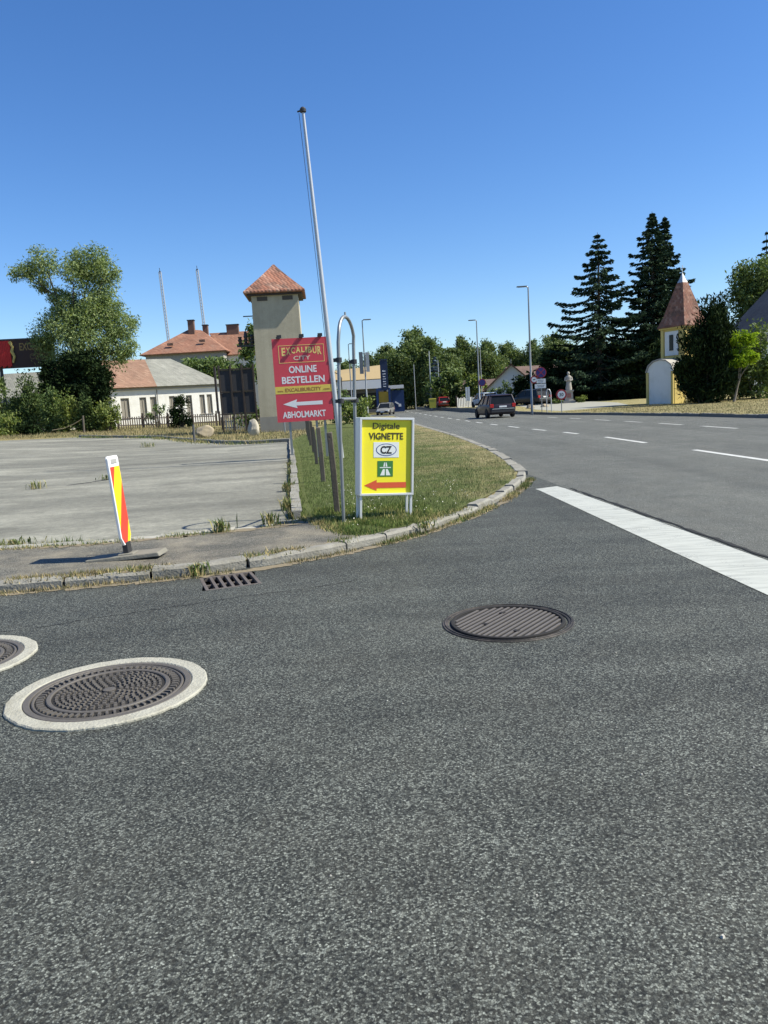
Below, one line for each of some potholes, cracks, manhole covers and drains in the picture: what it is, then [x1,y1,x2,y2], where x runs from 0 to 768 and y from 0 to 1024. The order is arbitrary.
manhole cover [3,657,207,732]
drain grate [199,572,261,591]
manhole cover [0,635,38,672]
manhole cover [442,604,575,643]
